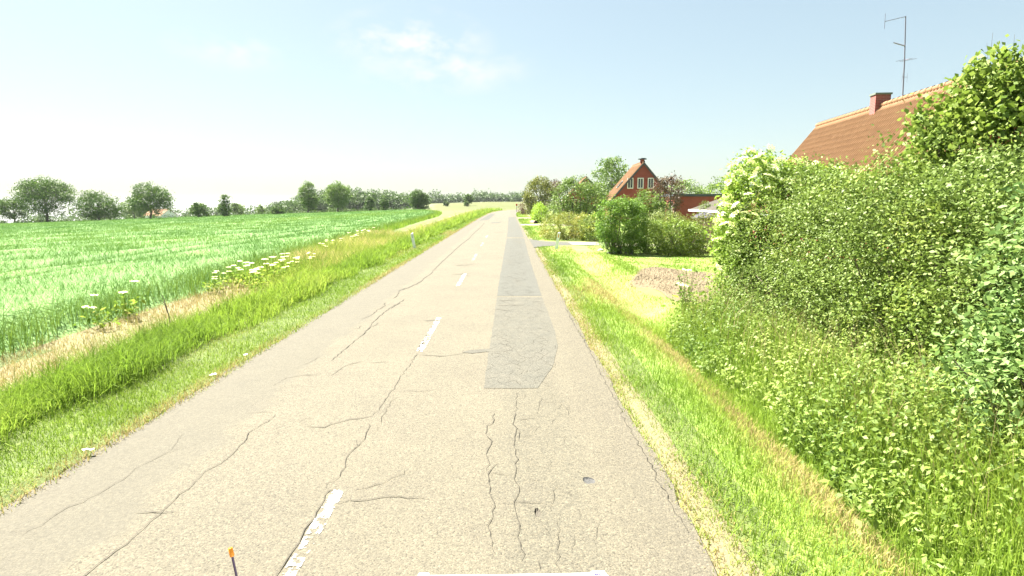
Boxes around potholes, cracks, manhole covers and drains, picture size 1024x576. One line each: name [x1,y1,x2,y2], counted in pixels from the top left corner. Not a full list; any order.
crack [246,320,461,576]
crack [504,392,599,568]
crack [485,411,506,549]
crack [25,440,197,532]
